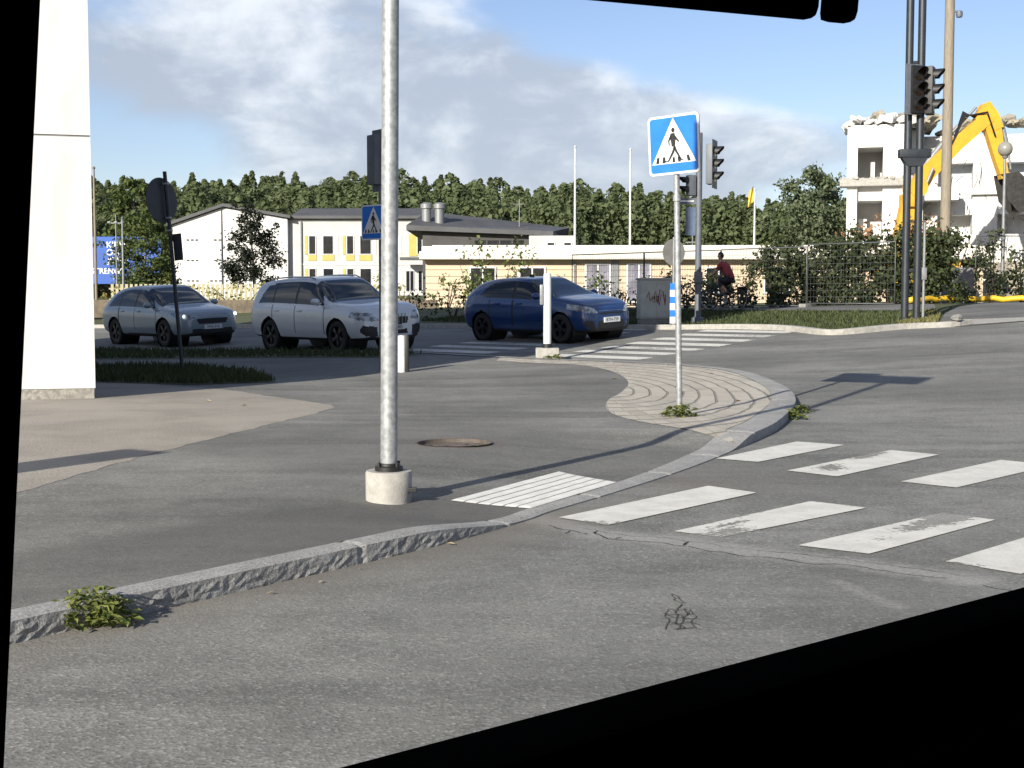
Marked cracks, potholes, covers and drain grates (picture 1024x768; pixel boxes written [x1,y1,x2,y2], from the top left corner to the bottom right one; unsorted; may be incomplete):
crack [539,524,1012,591]
crack [664,593,699,630]
manhole cover [416,438,492,448]
